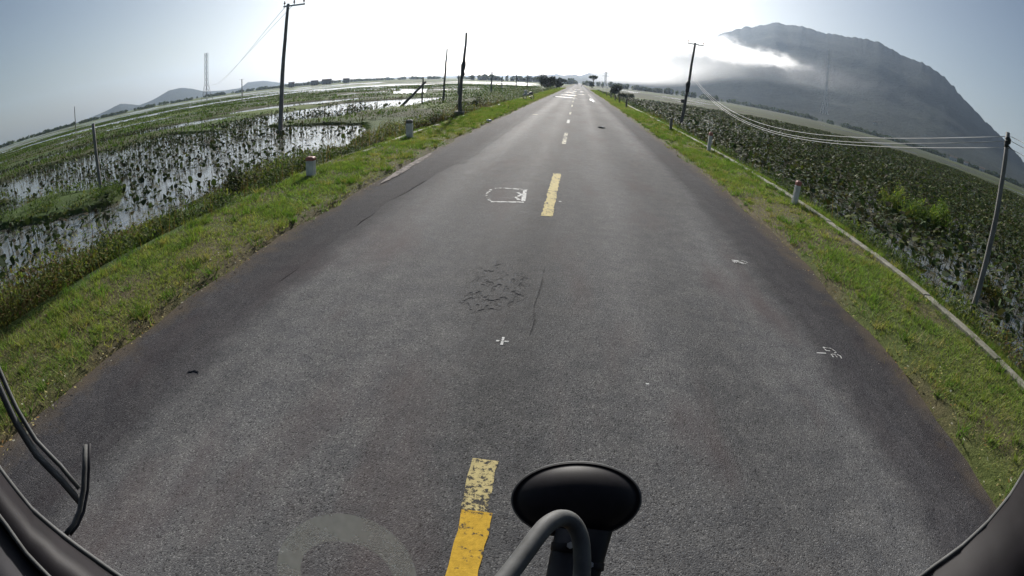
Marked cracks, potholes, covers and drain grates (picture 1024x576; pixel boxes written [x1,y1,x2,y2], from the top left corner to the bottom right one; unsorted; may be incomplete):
crack [440,180,565,337]
